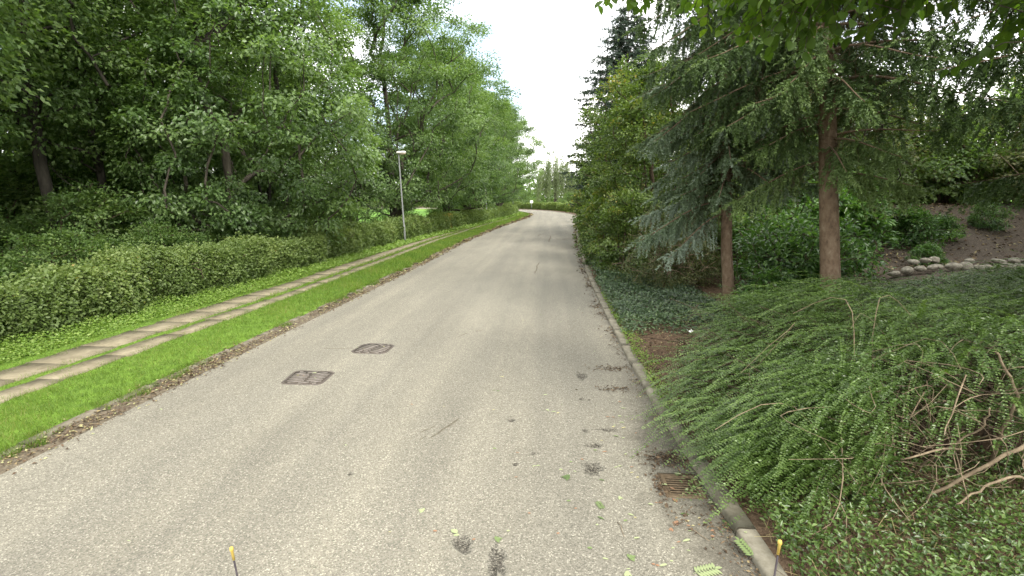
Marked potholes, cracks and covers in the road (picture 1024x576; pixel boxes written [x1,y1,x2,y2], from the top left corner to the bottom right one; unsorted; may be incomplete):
drain grate [657,473,708,499]
